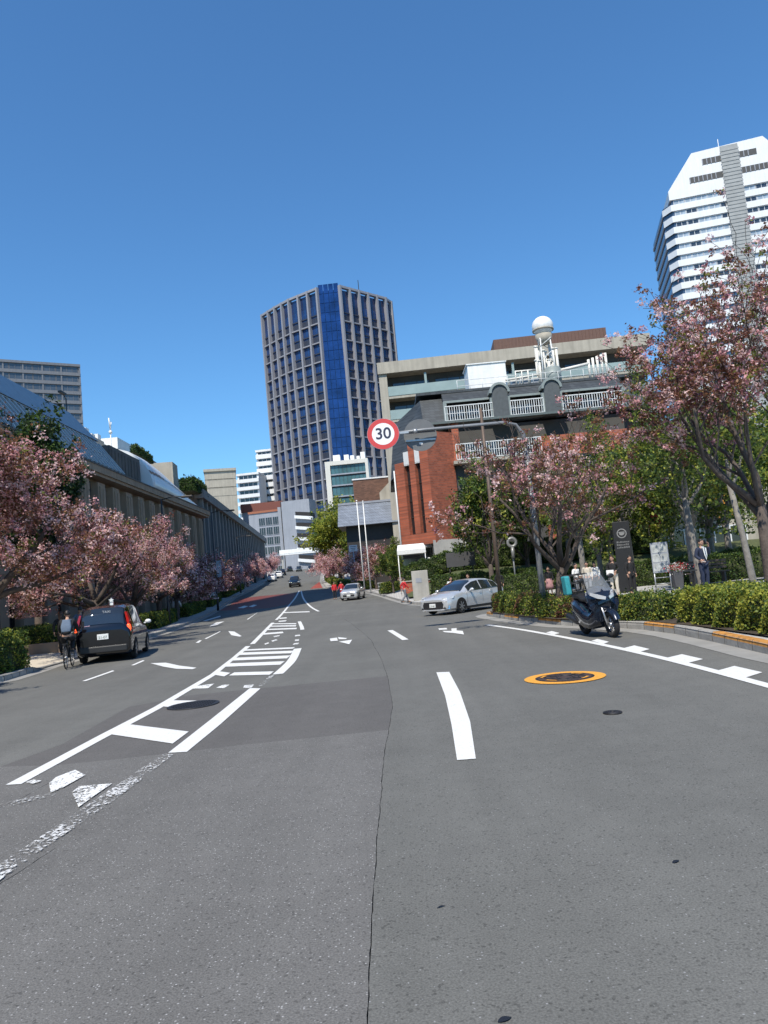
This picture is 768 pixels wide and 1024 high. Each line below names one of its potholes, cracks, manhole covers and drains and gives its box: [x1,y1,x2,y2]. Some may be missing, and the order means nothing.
manhole cover [524,671,606,684]
manhole cover [167,700,219,710]
